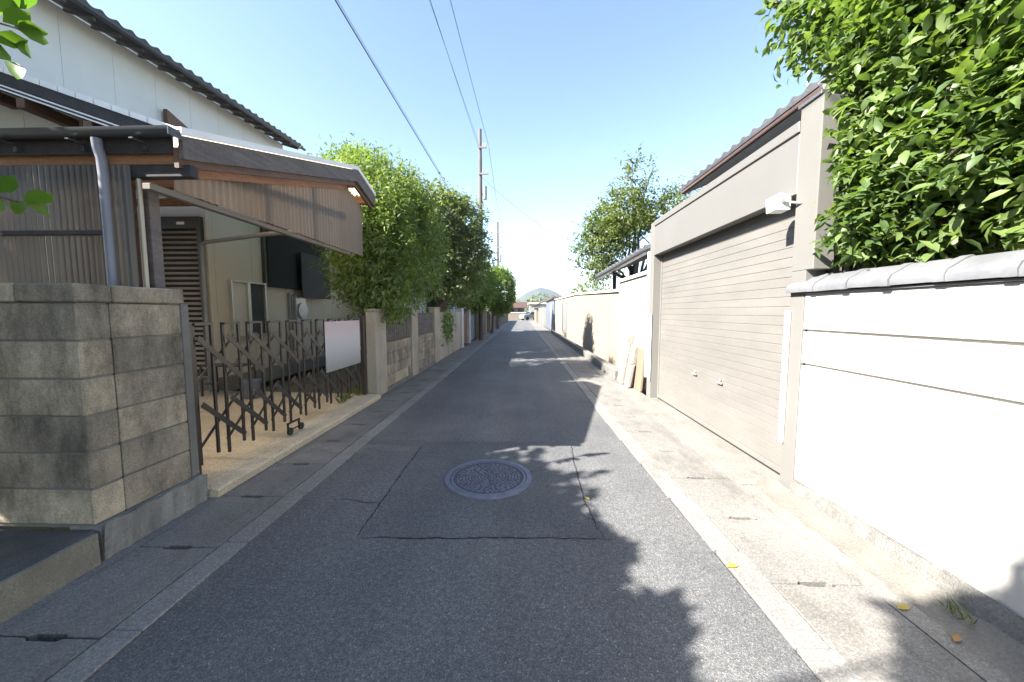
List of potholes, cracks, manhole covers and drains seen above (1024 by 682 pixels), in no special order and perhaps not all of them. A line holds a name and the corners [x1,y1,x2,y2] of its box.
manhole cover [445,459,532,500]
